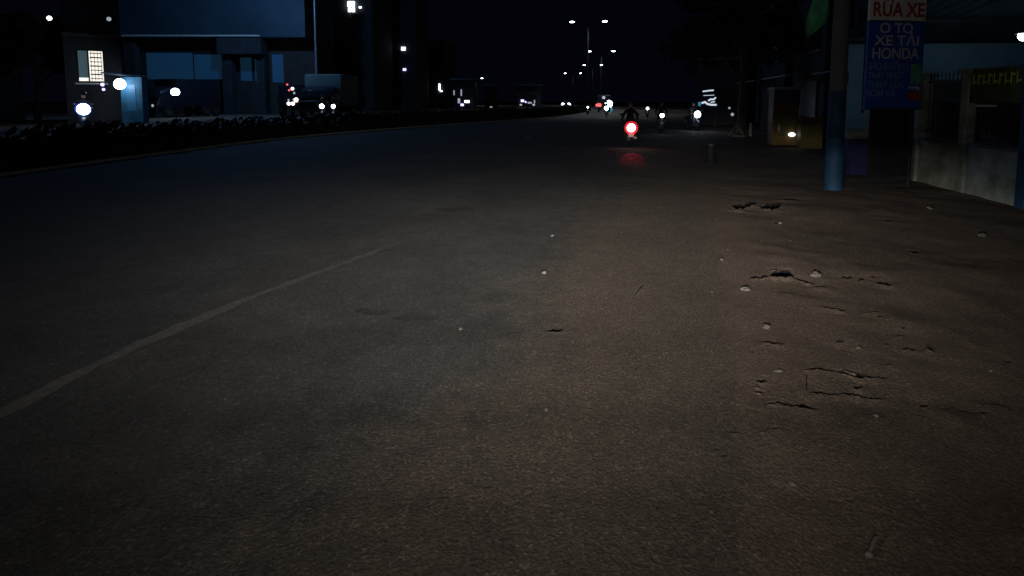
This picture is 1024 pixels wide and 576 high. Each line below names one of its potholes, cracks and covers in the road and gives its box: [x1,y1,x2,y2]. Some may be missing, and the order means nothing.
crack [839,276,893,287]
crack [763,368,908,410]
crack [750,269,819,288]
